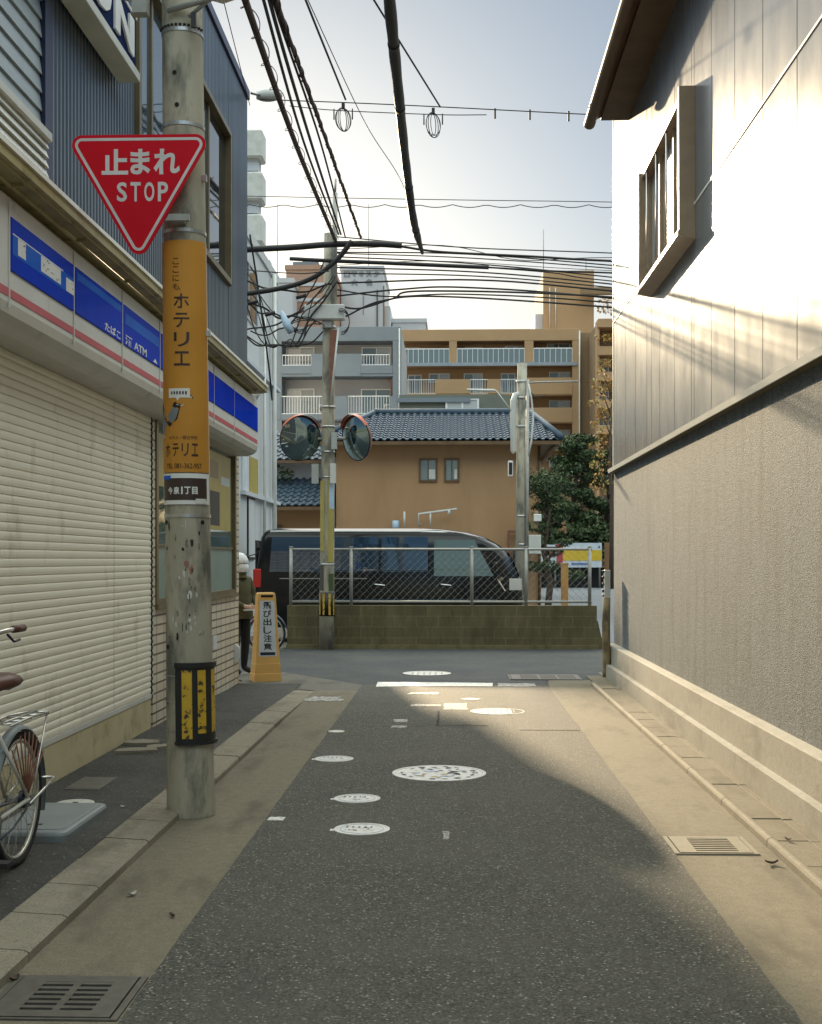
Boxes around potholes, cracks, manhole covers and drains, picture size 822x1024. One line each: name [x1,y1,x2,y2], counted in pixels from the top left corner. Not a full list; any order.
manhole cover [330,794,380,803]
manhole cover [392,765,486,781]
drain grate [0,975,148,1022]
utility cover [63,777,118,790]
manhole cover [329,823,390,835]
drain grate [662,836,760,855]
